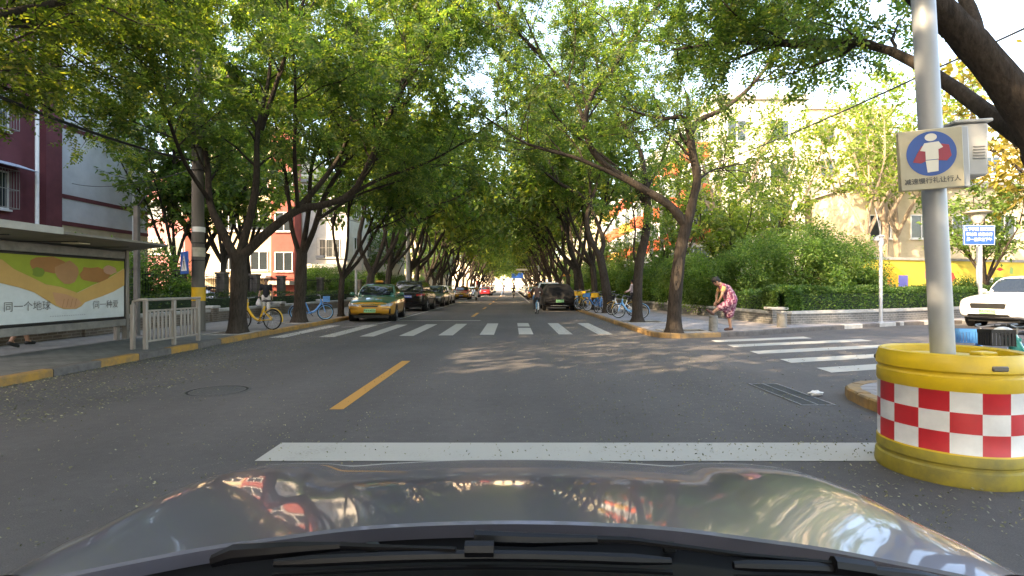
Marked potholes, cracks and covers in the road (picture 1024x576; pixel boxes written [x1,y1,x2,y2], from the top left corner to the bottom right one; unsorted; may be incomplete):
manhole cover [181,385,252,397]
drain grate [748,383,836,406]
